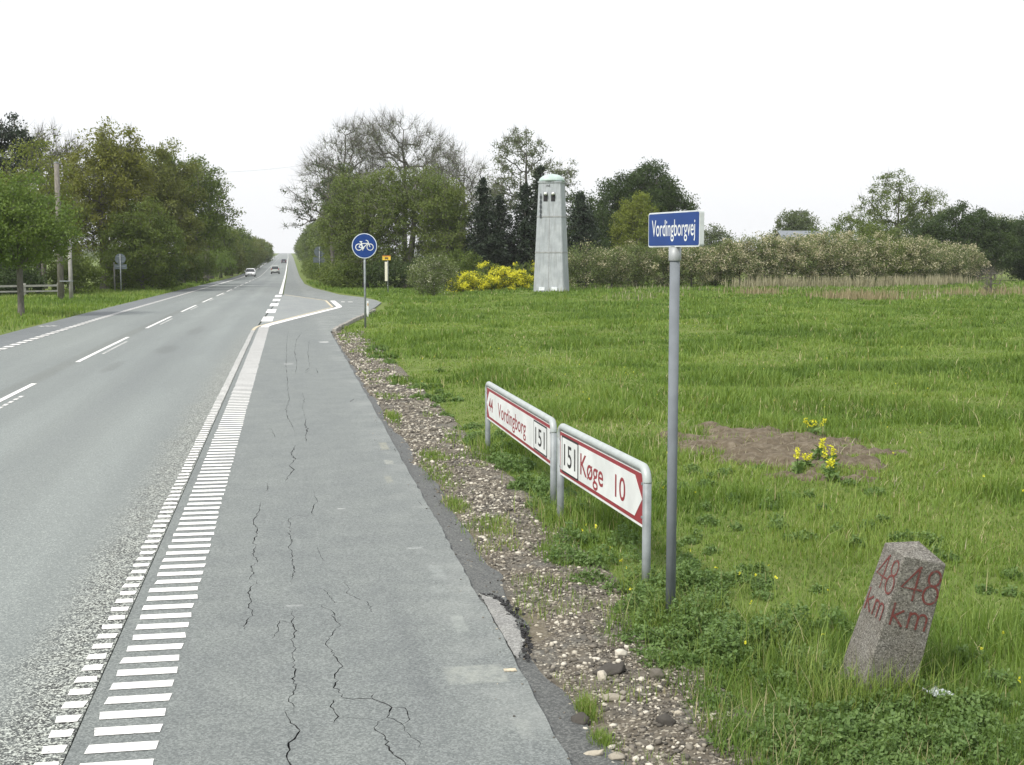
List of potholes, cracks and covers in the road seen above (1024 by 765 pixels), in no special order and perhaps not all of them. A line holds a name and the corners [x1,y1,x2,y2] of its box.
crack [272,335,318,481]
crack [321,582,421,765]
crack [274,613,300,765]
crack [243,483,268,629]
crack [288,491,317,582]
